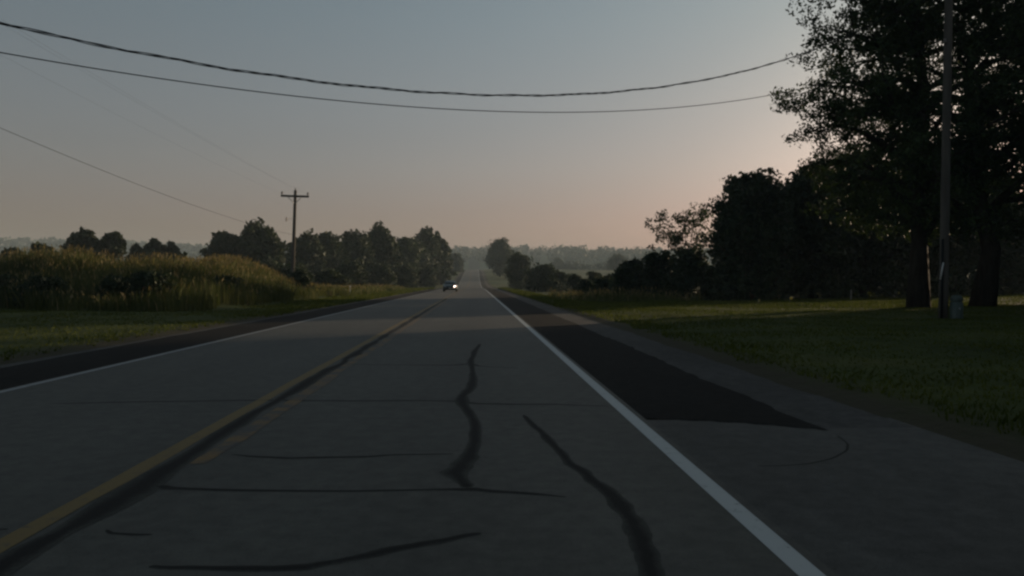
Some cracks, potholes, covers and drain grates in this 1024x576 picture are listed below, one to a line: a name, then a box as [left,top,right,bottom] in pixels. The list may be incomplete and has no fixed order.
crack [771,435,849,466]
